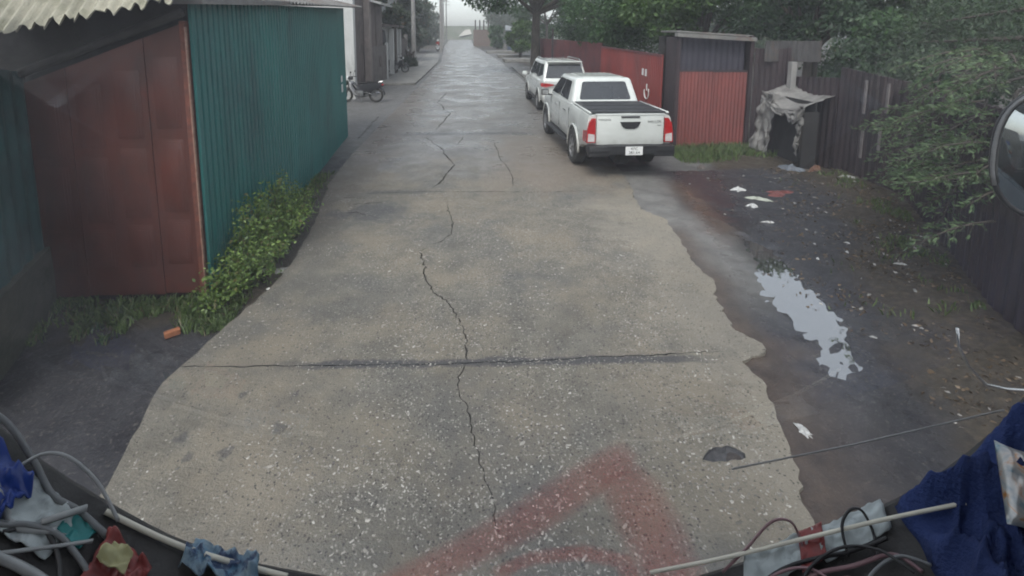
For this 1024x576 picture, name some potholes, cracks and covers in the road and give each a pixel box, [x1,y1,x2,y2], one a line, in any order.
pothole [702,445,746,462]
crack [424,93,463,186]
crack [419,206,503,553]
